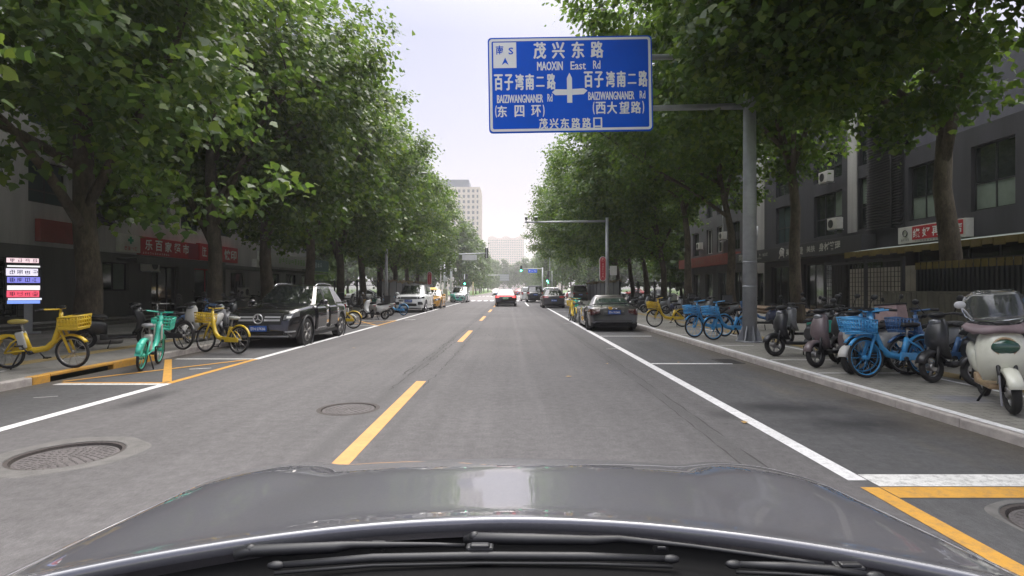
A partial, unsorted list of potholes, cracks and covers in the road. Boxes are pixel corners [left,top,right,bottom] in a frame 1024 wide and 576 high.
manhole cover [0,436,152,478]
manhole cover [316,402,380,416]
manhole cover [984,500,1024,532]
